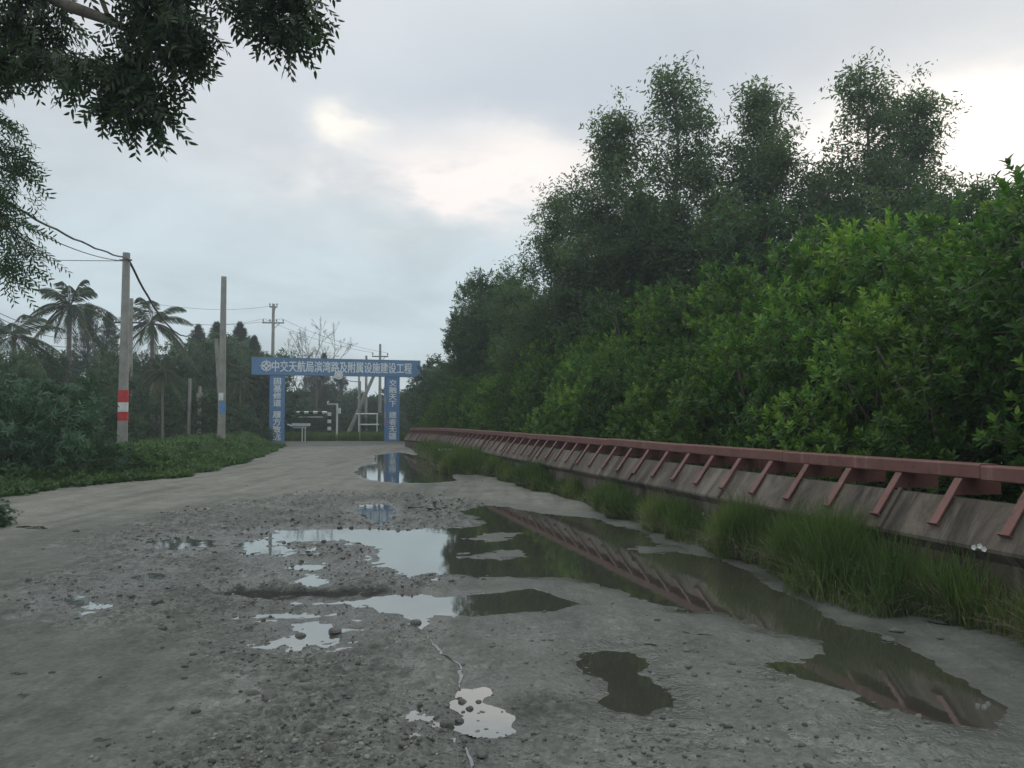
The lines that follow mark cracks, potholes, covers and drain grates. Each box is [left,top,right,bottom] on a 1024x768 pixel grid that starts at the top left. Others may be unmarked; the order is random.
pothole [353,452,457,483]
pothole [222,505,1020,730]
crack [427,636,463,691]
pothole [134,537,220,550]
